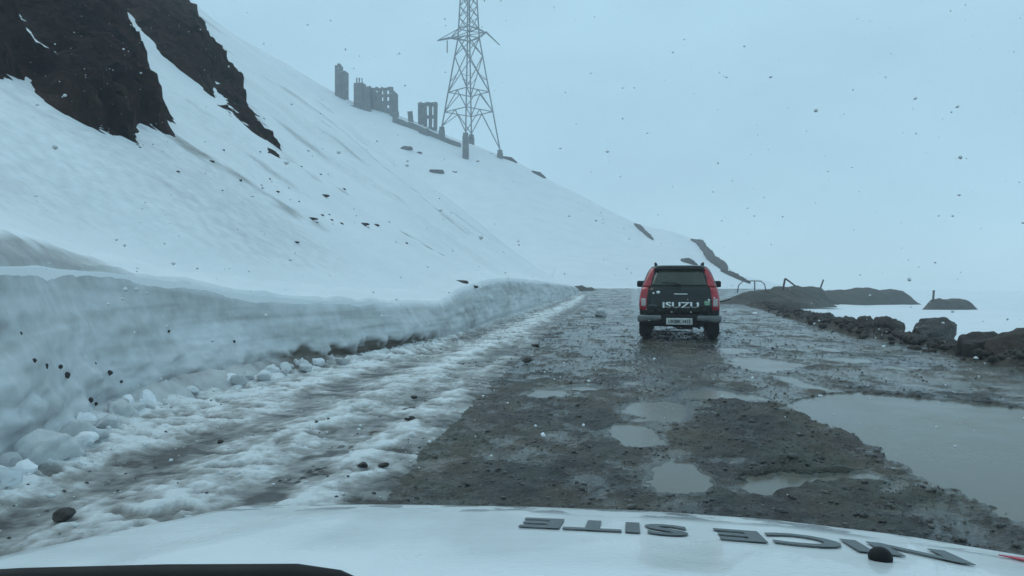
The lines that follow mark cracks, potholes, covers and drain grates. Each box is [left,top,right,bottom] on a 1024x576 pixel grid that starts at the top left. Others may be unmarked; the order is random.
pothole [725,464,889,499]
pothole [519,387,584,398]
pothole [643,459,724,495]
pothole [727,356,814,373]
pothole [603,421,672,448]
pothole [785,390,1024,526]
pothole [614,399,700,423]
